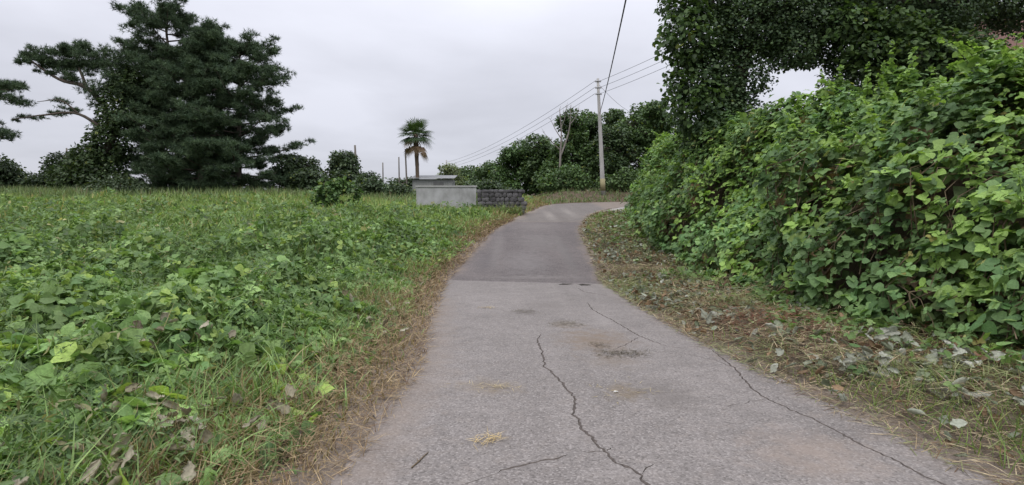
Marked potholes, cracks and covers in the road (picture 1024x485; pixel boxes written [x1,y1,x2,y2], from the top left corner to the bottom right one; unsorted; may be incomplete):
crack [463,288,946,485]
